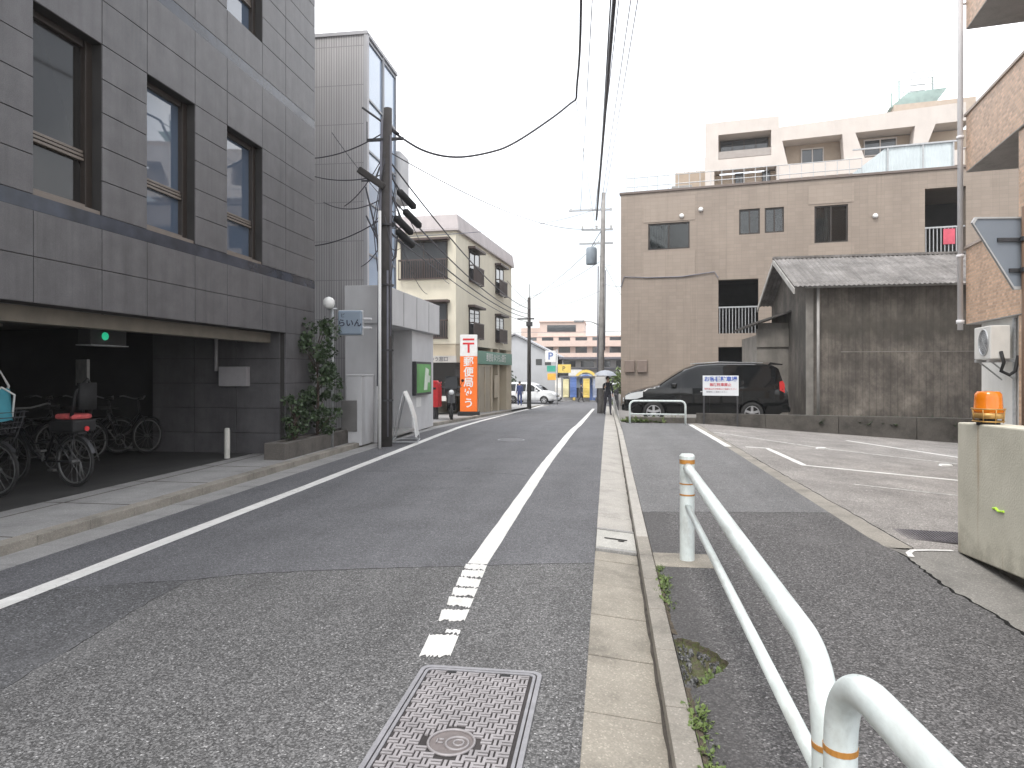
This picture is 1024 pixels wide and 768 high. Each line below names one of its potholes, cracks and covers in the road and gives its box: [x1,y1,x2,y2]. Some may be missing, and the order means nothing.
pothole [674,638,729,688]
manhole cover [358,665,542,768]
